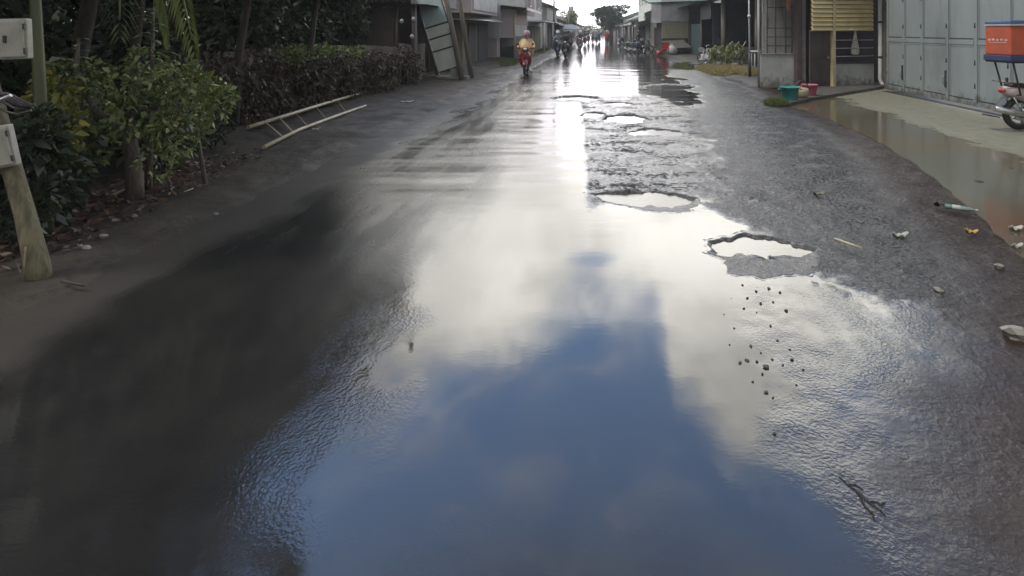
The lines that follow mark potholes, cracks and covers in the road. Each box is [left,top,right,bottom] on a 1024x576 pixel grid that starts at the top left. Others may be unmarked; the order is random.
pothole [623,127,693,143]
pothole [583,188,707,213]
pothole [545,95,604,103]
crack [839,477,886,521]
pothole [597,113,650,124]
pothole [702,230,824,281]
